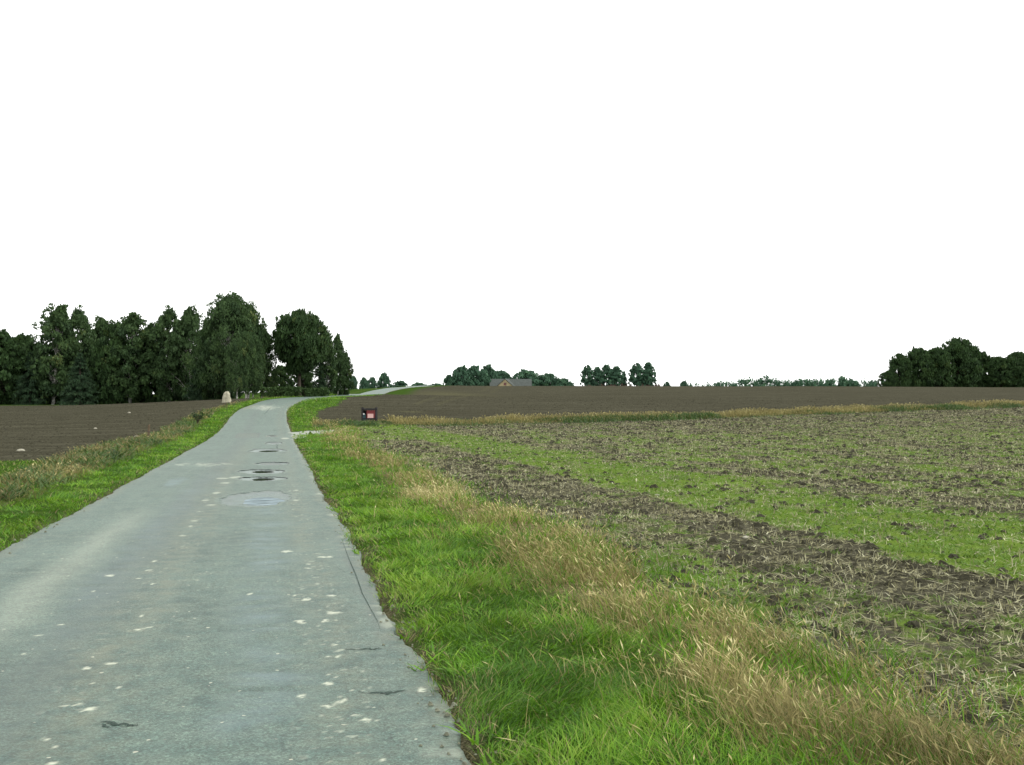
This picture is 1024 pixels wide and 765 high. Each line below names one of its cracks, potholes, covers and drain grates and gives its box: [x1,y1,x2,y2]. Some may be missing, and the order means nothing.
crack [330,544,387,634]
pothole [214,490,297,508]
